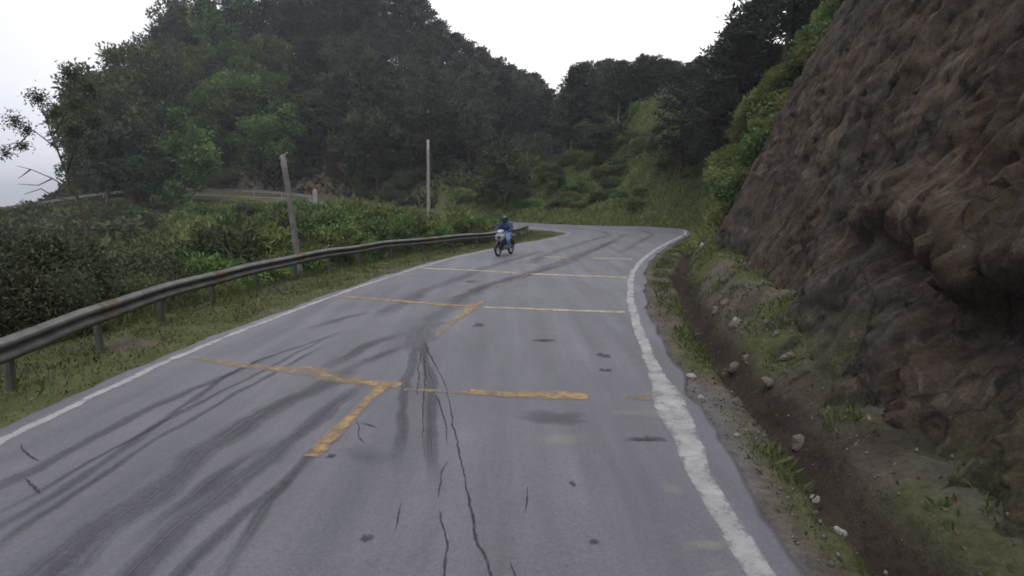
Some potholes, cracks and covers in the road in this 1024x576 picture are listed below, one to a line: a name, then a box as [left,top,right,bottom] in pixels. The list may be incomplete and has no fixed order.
crack [417,342,492,576]
